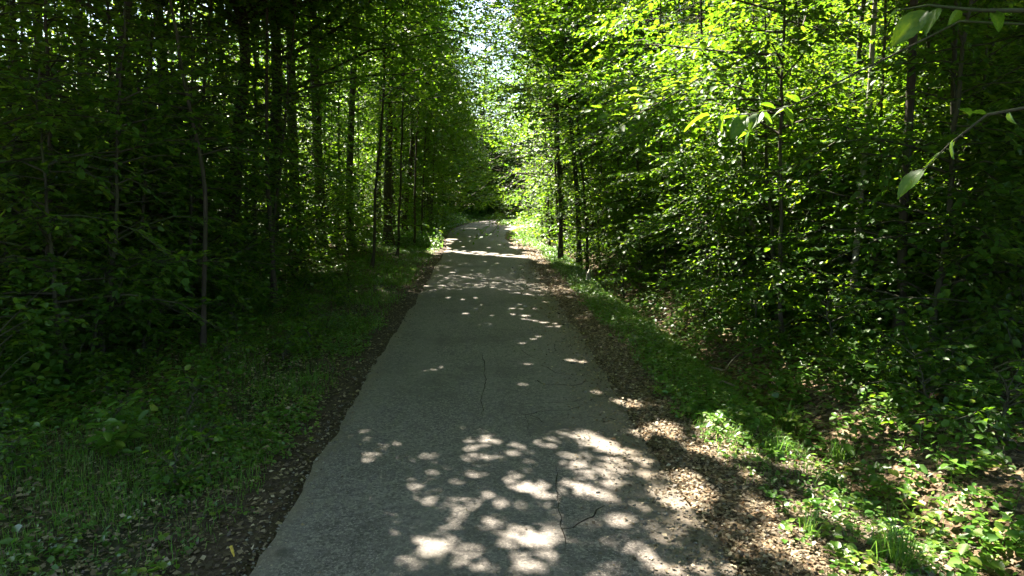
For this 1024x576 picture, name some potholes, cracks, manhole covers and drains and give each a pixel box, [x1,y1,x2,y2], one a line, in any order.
crack [523,344,586,428]
crack [556,470,605,554]
